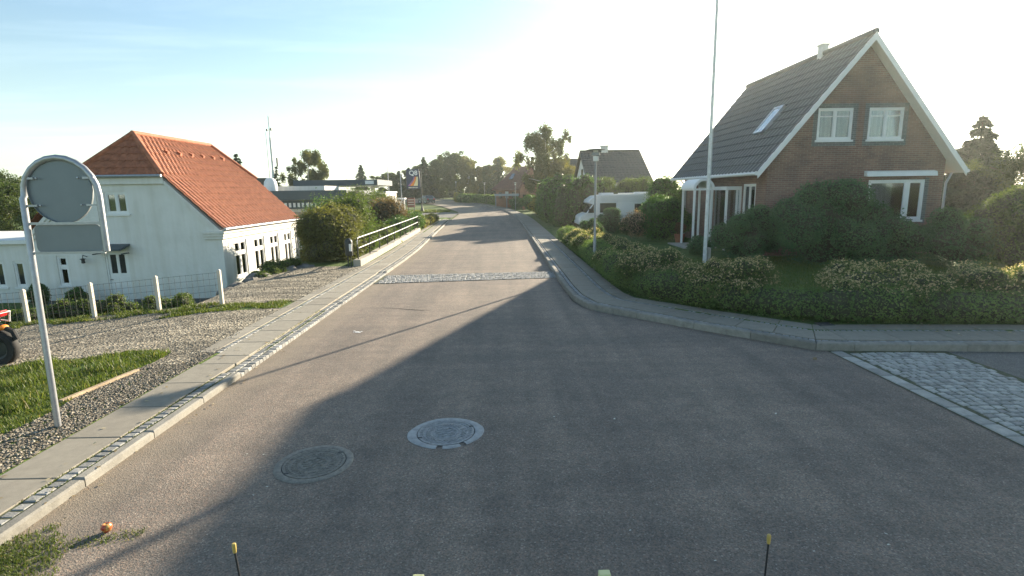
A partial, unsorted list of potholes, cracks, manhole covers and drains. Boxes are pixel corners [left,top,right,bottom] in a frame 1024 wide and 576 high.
manhole cover [273,445,354,484]
manhole cover [407,418,484,449]
